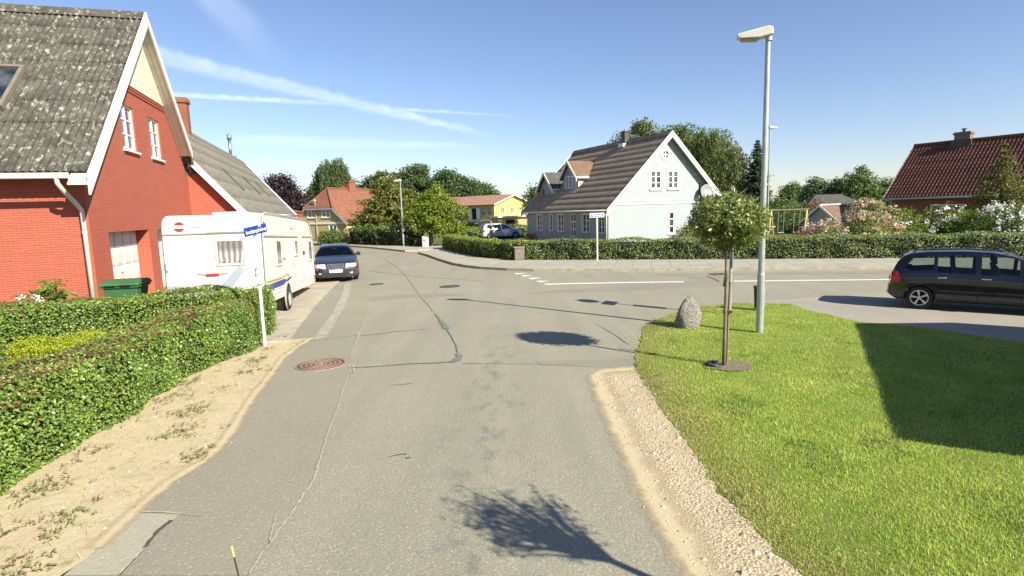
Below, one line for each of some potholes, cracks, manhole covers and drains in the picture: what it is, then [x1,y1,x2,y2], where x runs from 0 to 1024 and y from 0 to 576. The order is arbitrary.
crack [248,302,427,574]
manhole cover [294,357,346,371]
